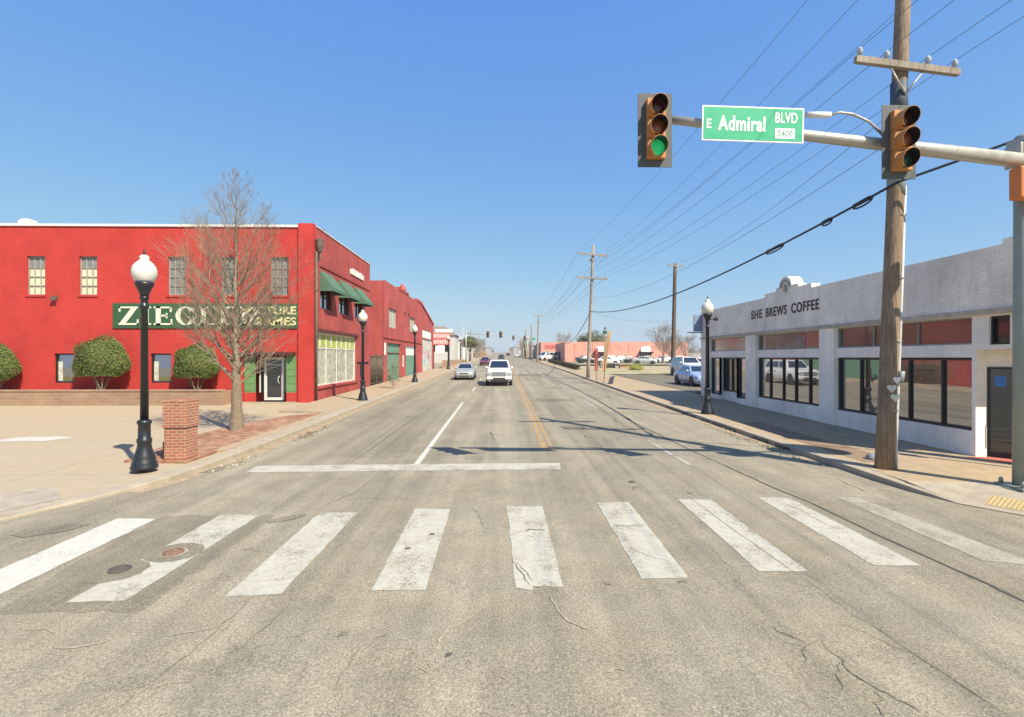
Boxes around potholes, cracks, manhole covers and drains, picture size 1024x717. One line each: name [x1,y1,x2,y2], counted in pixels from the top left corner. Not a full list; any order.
crack [513,561,589,630]
crack [772,580,1013,717]
manhole cover [161,547,185,556]
manhole cover [107,564,132,574]
